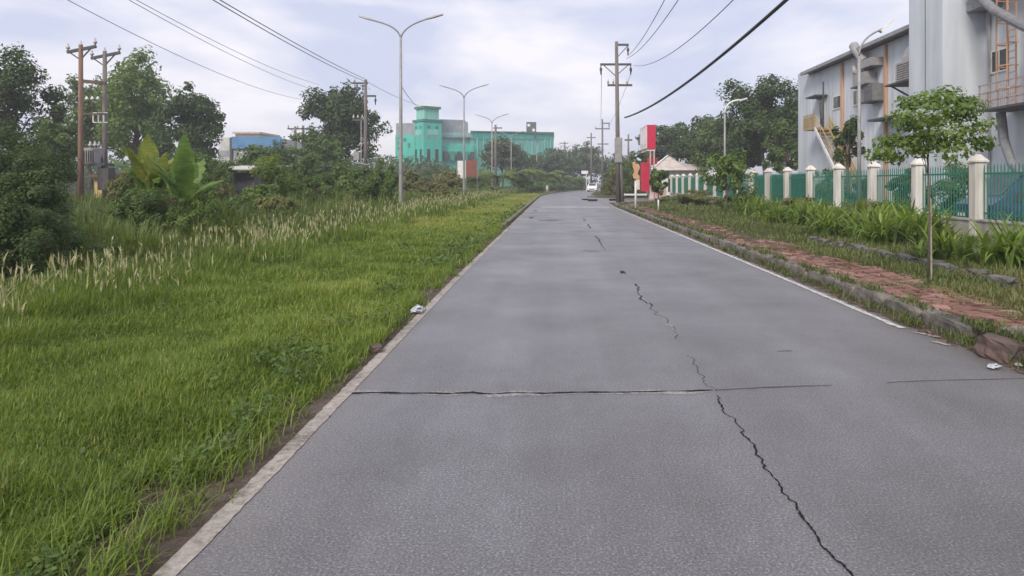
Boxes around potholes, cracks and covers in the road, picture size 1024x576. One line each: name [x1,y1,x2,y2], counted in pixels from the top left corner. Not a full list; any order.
crack [346,284,854,576]
